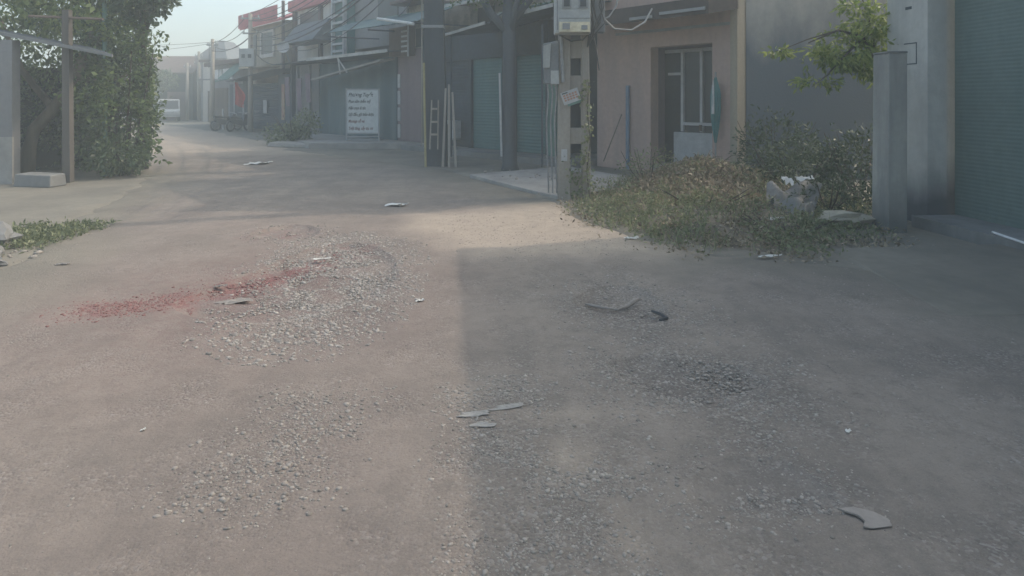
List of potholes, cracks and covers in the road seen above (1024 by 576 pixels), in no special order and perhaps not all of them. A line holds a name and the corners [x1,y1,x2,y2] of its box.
pothole [172,242,400,324]
pothole [605,355,774,410]
